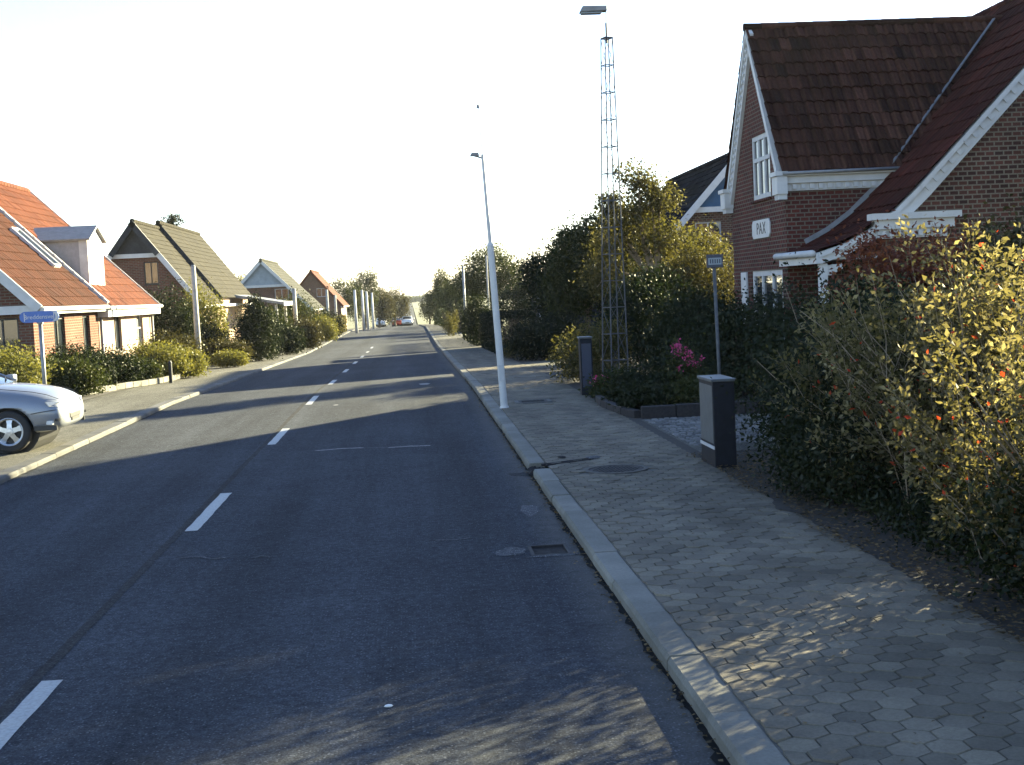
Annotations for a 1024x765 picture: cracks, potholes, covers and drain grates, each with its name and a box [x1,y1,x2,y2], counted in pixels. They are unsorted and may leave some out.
manhole cover [584,464,648,474]
drain grate [527,543,572,556]
